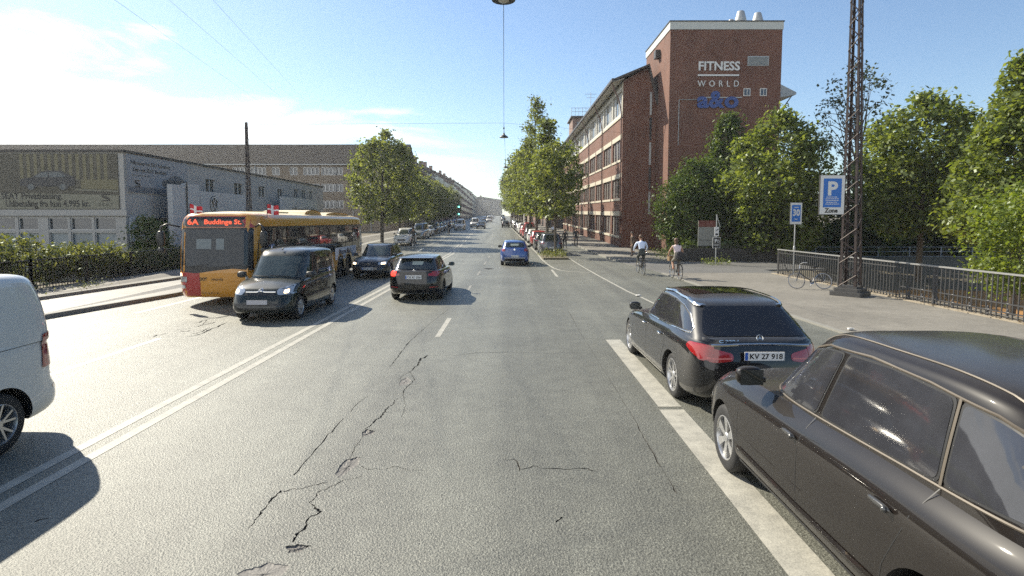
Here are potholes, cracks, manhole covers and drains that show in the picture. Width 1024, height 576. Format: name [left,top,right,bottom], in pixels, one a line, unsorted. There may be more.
crack [154,320,225,337]
crack [504,459,593,471]
crack [248,352,524,548]
